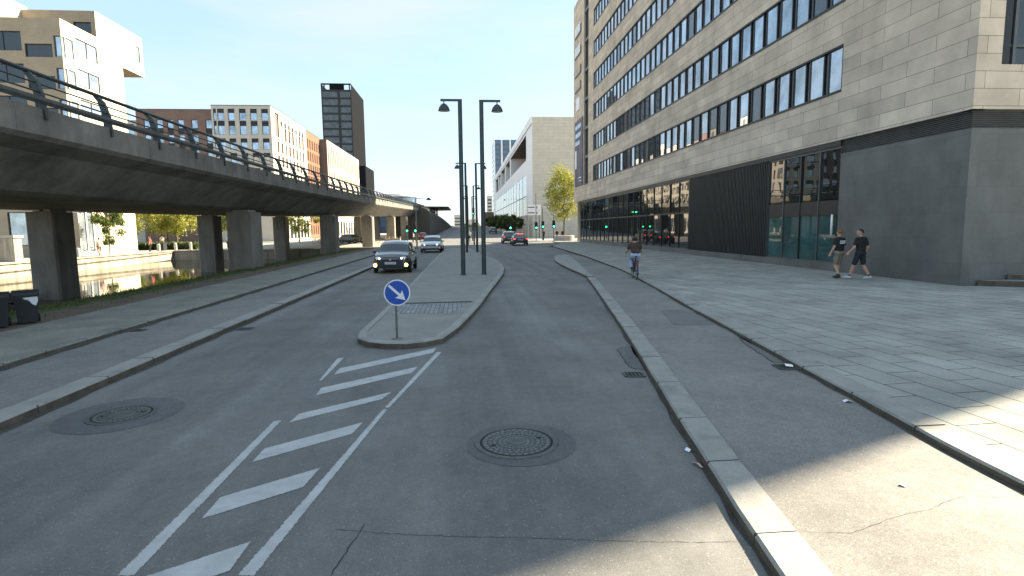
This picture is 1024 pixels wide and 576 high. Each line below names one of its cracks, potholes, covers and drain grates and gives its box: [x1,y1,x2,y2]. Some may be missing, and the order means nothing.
manhole cover [49,397,185,435]
crack [331,524,734,575]
manhole cover [467,424,576,467]
